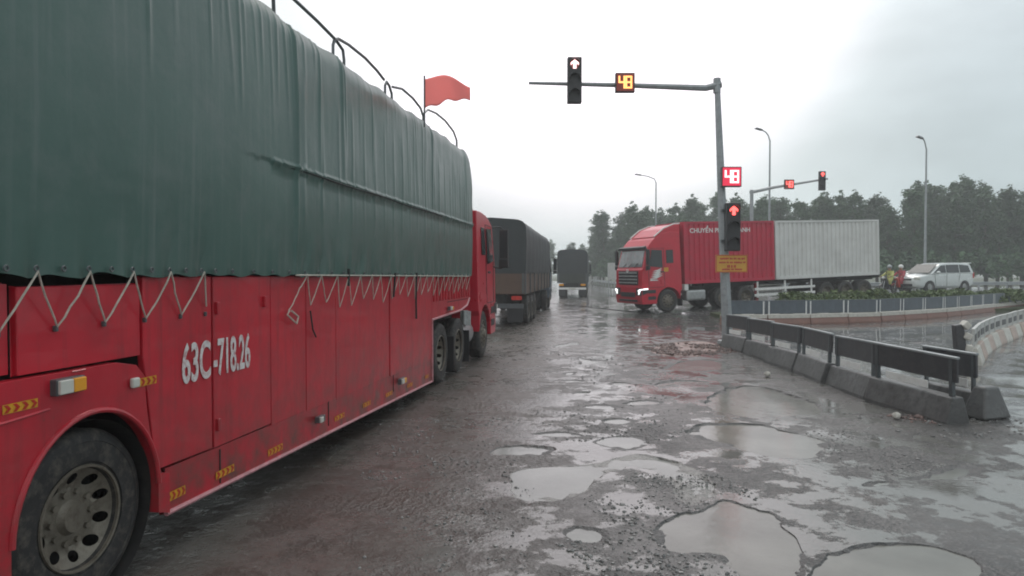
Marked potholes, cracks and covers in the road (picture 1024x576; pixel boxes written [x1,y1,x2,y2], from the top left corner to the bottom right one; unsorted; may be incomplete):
pothole [510,454,720,506]
pothole [652,499,809,576]
pothole [593,435,649,450]
pothole [650,341,719,357]
pothole [704,385,823,418]
pothole [806,542,985,576]
pothole [684,422,828,458]
pothole [562,526,610,543]
pothole [489,445,557,455]
